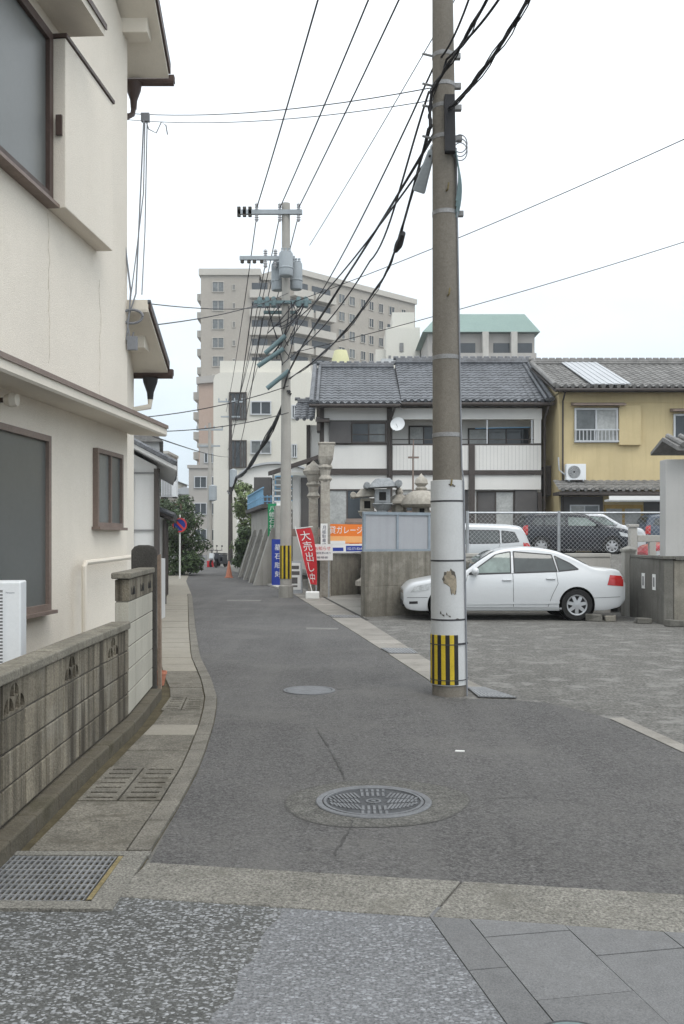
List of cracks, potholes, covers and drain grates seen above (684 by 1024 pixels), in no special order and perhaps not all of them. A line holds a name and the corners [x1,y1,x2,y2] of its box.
drain grate [0,851,151,912]
manhole cover [284,779,471,827]
crack [316,728,354,855]
drain grate [468,687,517,699]
manhole cover [283,686,335,695]
